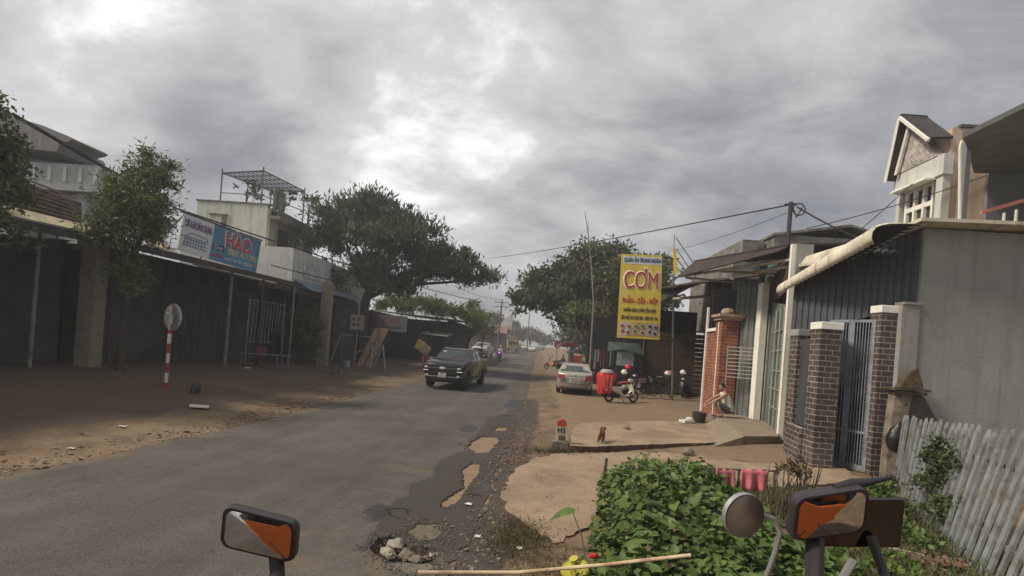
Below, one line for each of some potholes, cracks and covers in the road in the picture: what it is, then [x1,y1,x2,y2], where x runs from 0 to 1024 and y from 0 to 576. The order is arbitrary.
pothole [440,463,481,507]
pothole [404,523,442,540]
pothole [369,534,439,573]
pothole [467,436,500,453]
